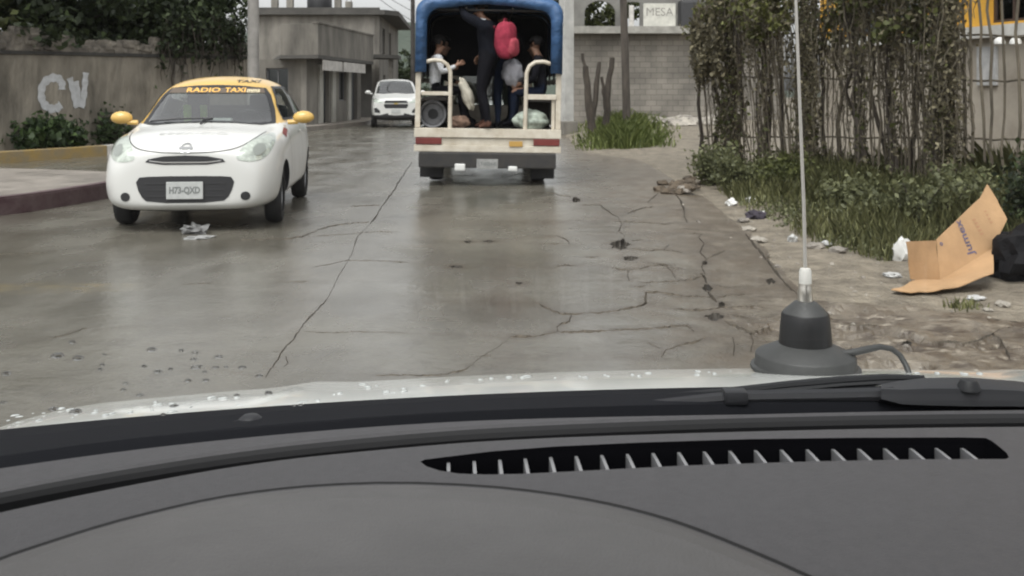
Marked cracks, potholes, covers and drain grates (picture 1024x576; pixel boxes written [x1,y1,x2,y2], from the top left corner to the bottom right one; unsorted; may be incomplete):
crack [241,159,412,378]
crack [375,193,797,376]
pothole [610,238,630,250]
crack [932,328,1010,360]
